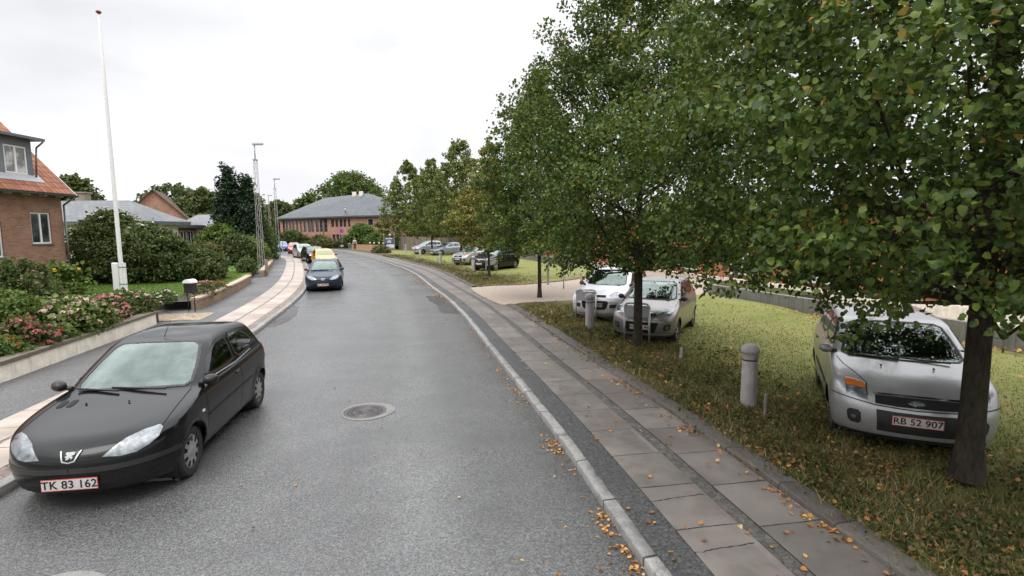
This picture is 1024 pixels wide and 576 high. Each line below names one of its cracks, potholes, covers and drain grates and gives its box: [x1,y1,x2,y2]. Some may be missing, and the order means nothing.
manhole cover [342,403,395,421]
